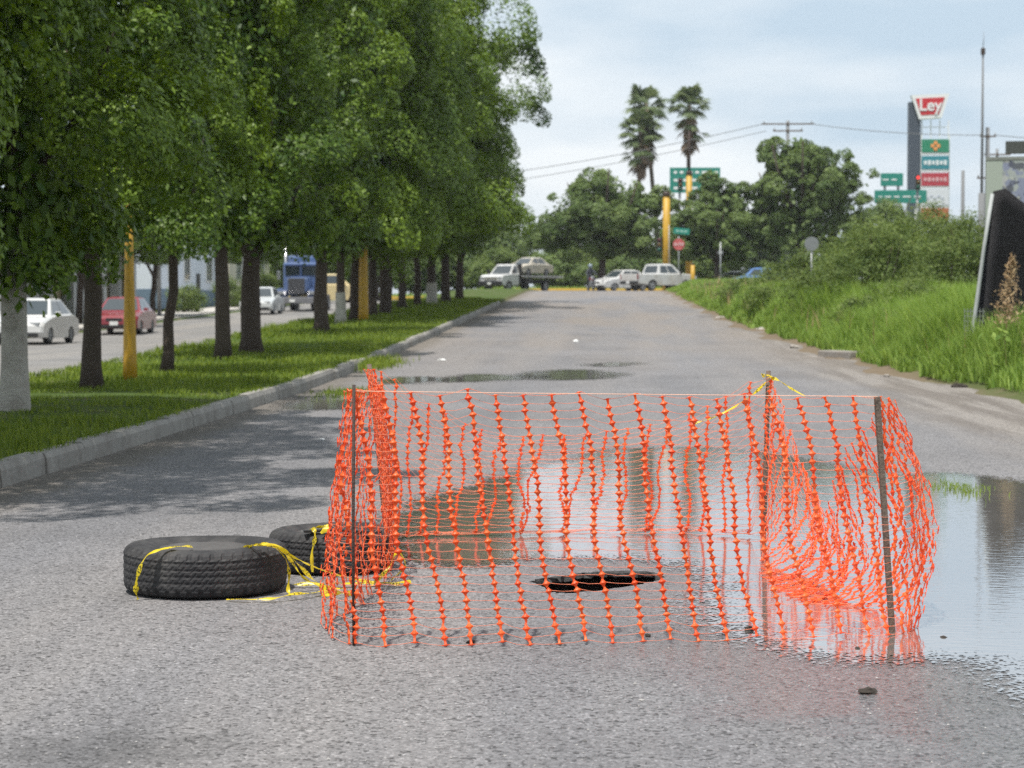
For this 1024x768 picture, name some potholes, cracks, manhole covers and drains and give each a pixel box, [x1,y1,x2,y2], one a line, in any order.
pothole [530,571,665,593]
